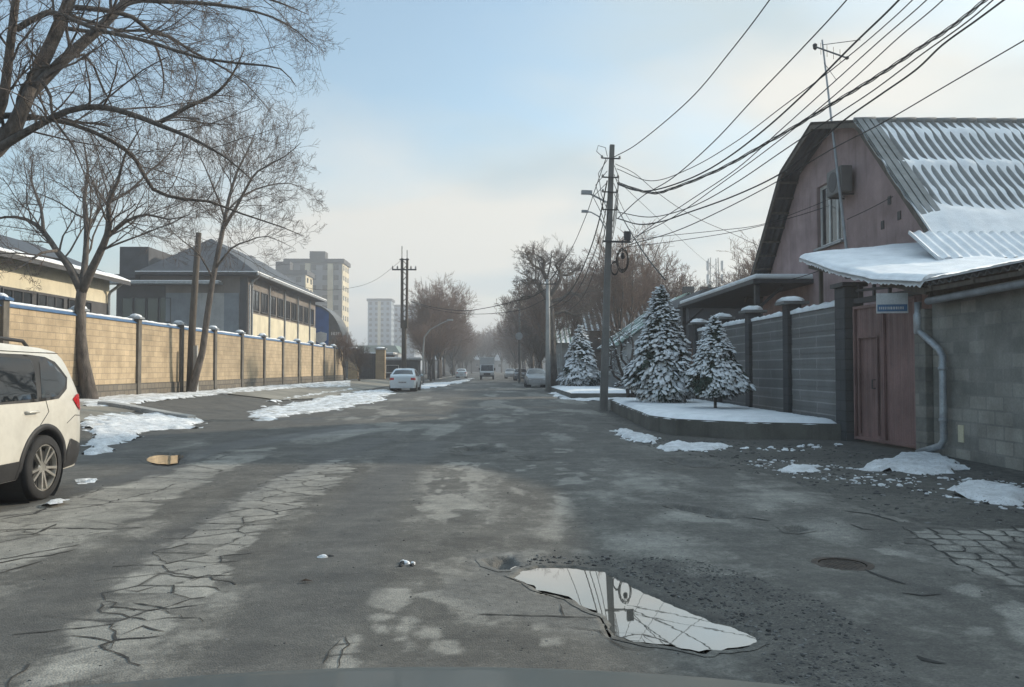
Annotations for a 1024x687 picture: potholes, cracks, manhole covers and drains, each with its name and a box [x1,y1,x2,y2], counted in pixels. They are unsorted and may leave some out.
crack [7,457,359,687]
pothole [504,563,769,657]
crack [843,510,1024,595]
pothole [476,553,527,572]
manhole cover [811,557,875,571]
